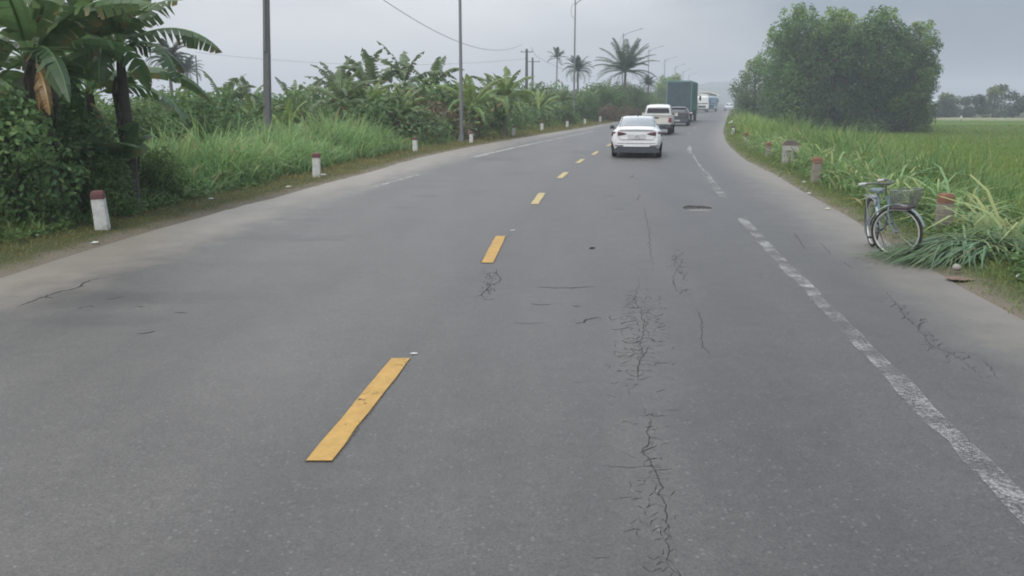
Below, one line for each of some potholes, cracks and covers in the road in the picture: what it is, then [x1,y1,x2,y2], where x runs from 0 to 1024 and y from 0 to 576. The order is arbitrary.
crack [886,296,996,378]
crack [476,271,501,300]
crack [572,177,675,397]
crack [20,278,142,309]
crack [597,409,681,576]
crack [667,249,710,355]
